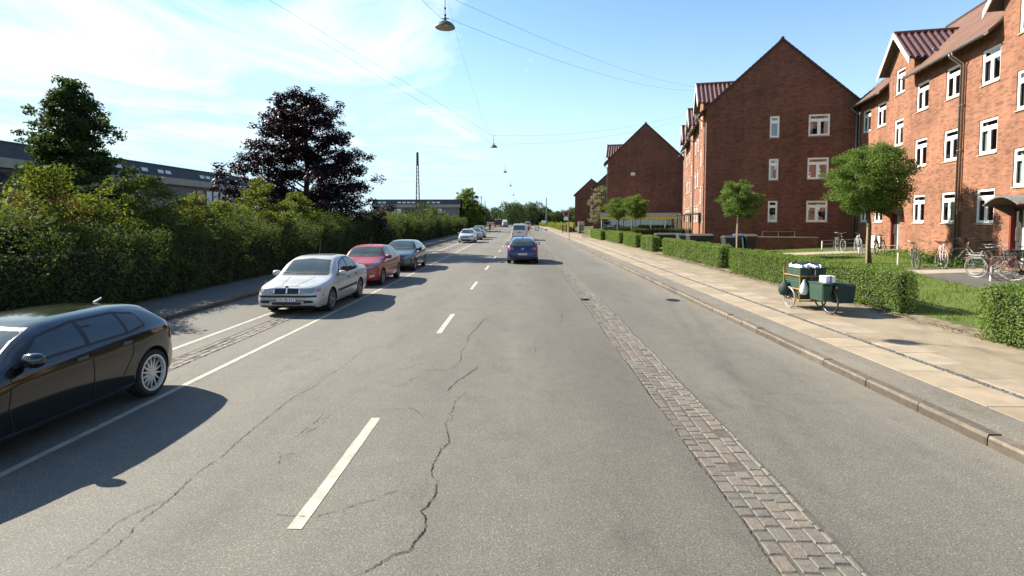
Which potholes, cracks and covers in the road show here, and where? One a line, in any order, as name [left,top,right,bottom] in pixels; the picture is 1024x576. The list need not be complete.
crack [54,348,365,575]
crack [360,394,464,574]
